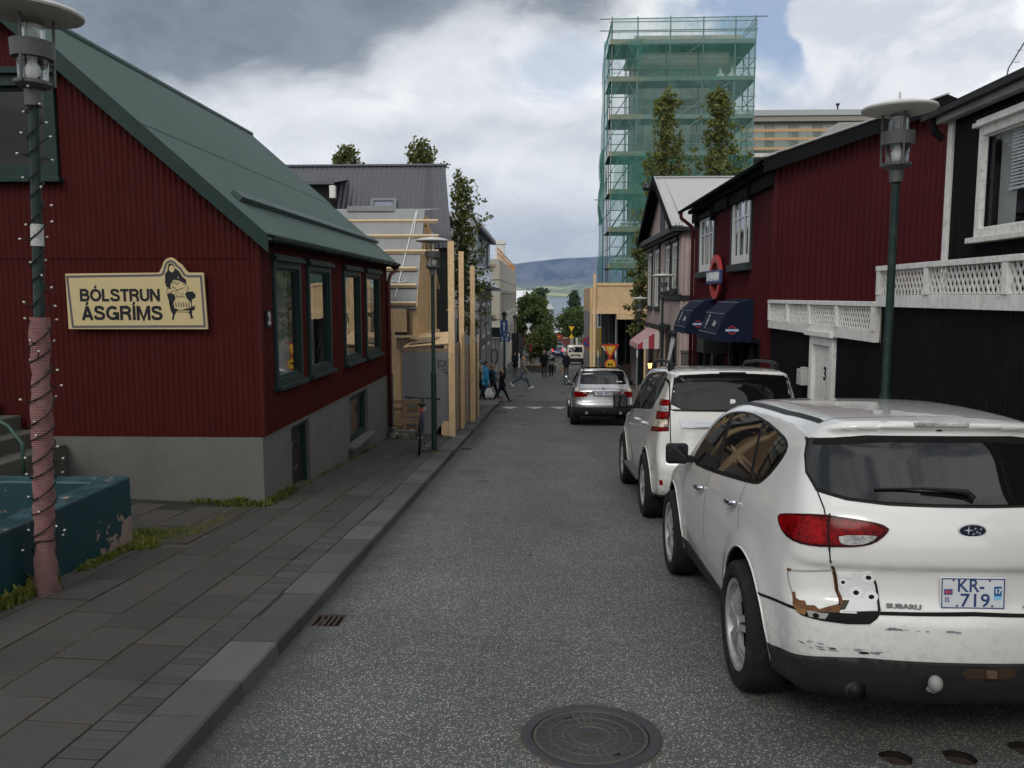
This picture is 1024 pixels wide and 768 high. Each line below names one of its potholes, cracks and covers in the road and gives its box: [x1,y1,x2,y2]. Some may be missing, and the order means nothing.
drain grate [309,614,348,627]
manhole cover [521,705,662,768]
